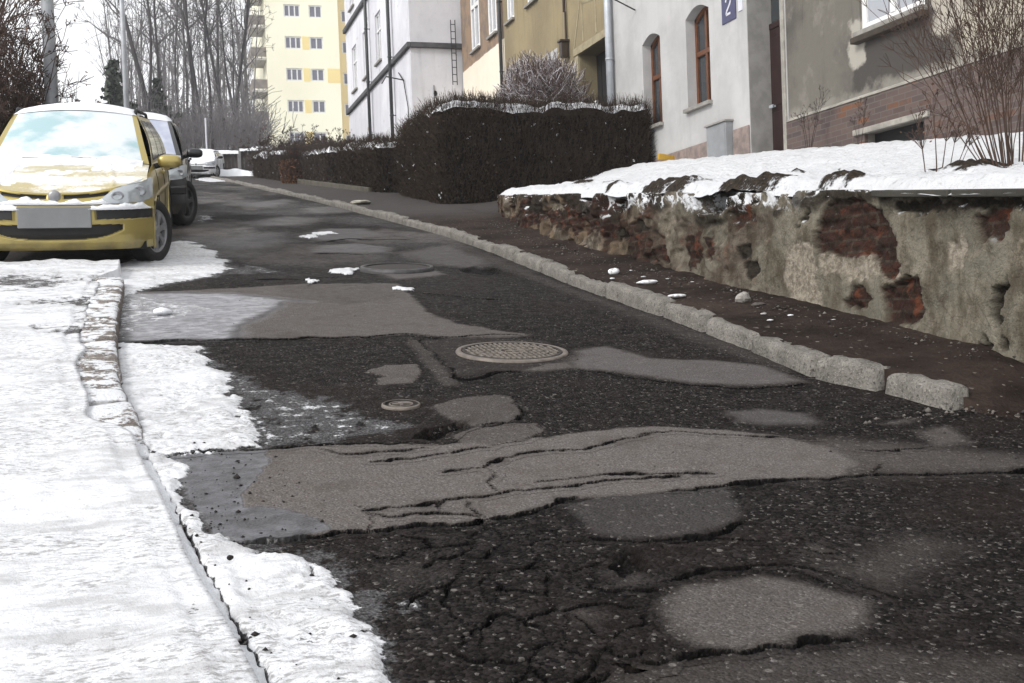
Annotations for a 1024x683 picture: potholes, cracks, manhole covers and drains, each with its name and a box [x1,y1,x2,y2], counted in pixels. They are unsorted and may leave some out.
manhole cover [381,399,421,411]
manhole cover [360,263,434,274]
crack [121,332,1024,683]
manhole cover [456,342,569,363]
